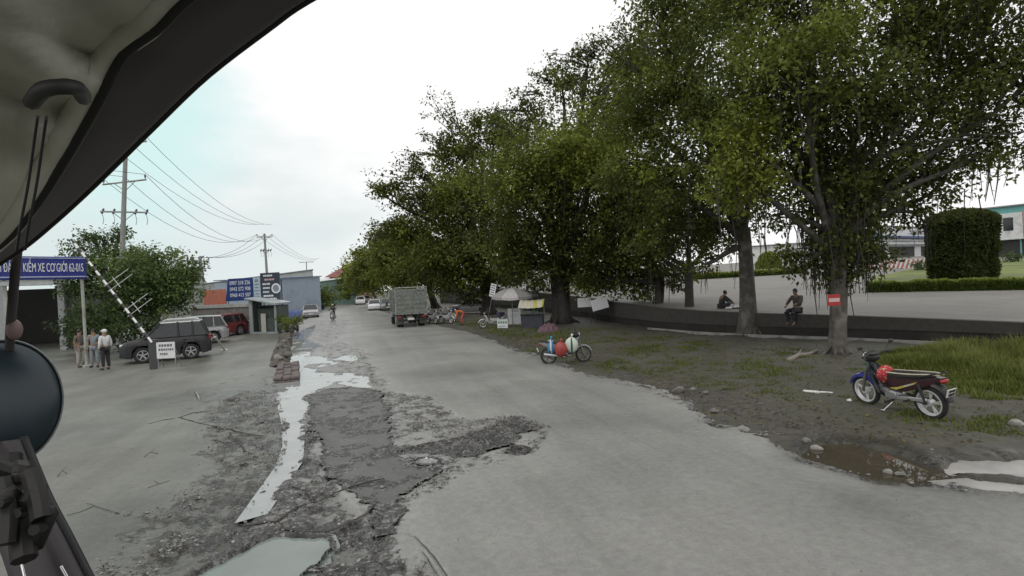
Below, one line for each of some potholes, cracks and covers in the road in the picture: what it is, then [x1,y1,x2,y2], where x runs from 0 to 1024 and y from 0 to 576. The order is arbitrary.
crack [414,536,447,576]
pothole [189,531,336,576]
pothole [304,387,451,537]
crack [149,410,265,454]
